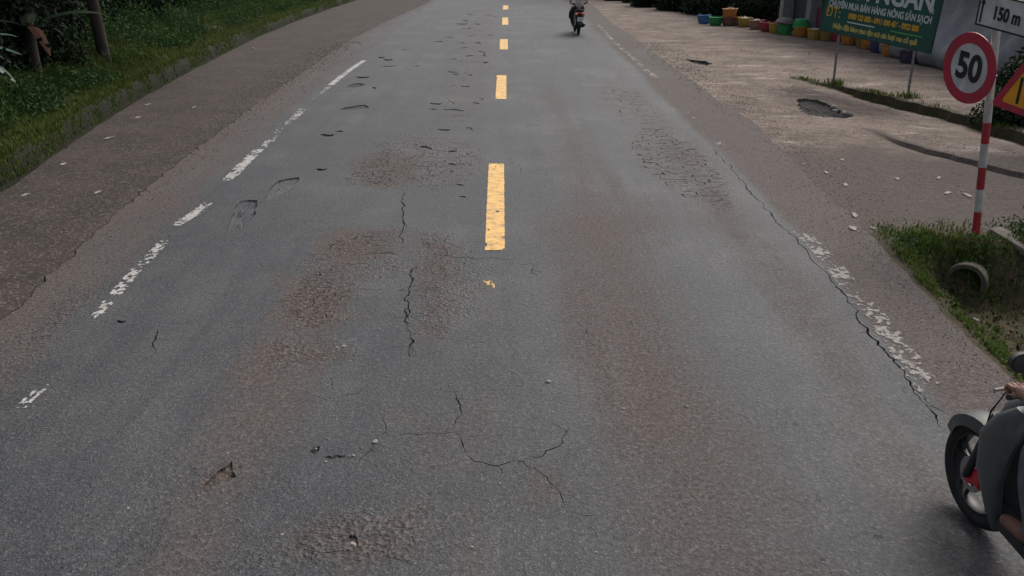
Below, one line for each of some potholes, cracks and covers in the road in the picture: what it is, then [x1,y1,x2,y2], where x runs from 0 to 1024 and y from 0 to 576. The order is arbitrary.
crack [603,89,946,426]
crack [289,137,499,357]
pothole [227,200,258,229]
pothole [205,461,236,489]
crack [359,389,597,537]
pothole [797,99,854,118]
pothole [265,177,299,200]
